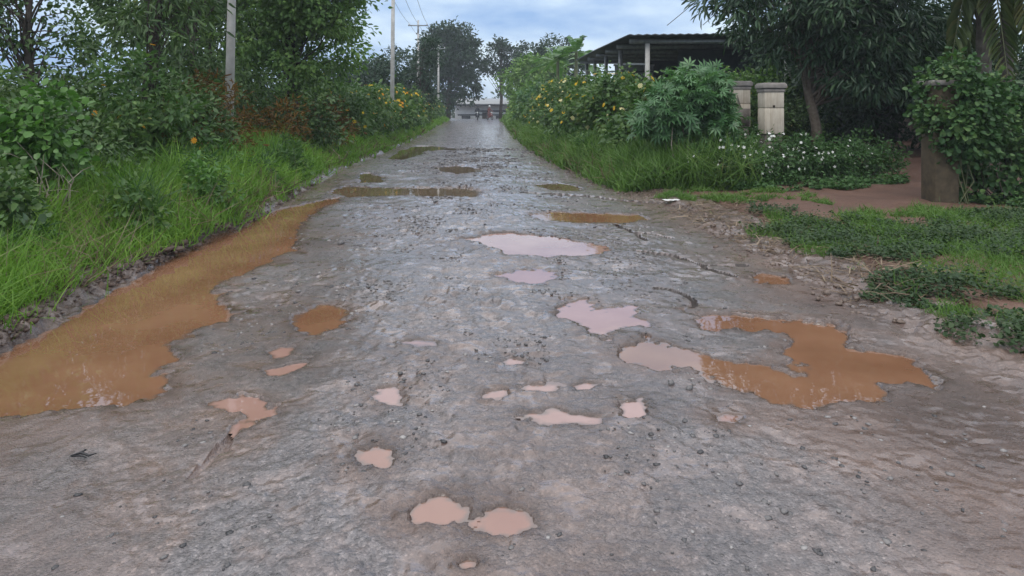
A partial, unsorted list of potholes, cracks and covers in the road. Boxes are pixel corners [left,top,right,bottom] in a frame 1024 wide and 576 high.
pothole [525,210,655,228]
pothole [608,393,656,418]
pothole [464,501,542,540]
pothole [385,145,459,160]
pothole [402,487,480,529]
pothole [513,404,617,427]
pothole [434,164,486,174]
crack [653,287,699,308]
pothole [327,185,487,198]
pothole [201,391,299,441]
pothole [363,382,412,408]
pothole [0,197,345,419]
